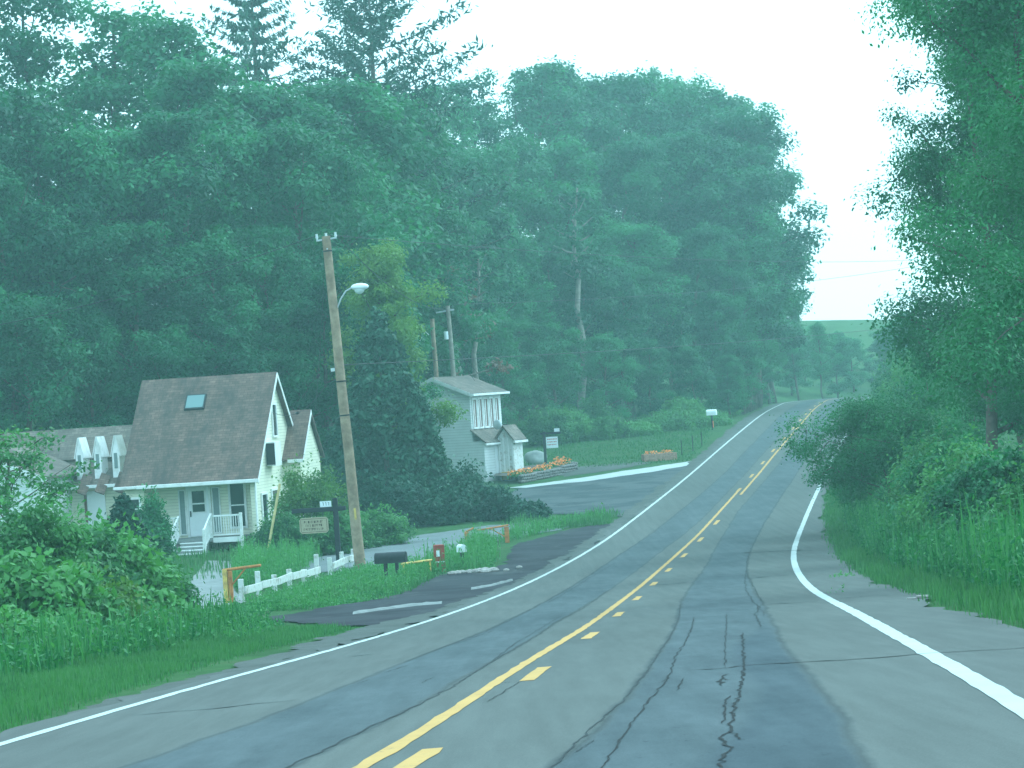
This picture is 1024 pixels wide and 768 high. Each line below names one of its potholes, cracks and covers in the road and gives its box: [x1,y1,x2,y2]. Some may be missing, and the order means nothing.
crack [549,604,1024,768]
